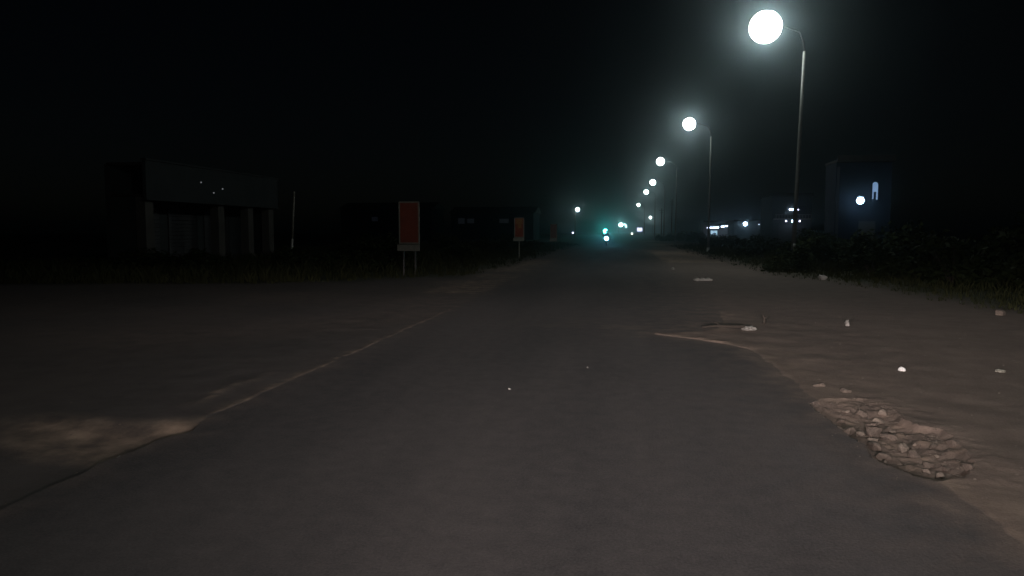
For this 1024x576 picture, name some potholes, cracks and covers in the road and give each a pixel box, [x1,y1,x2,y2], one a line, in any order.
pothole [808,398,975,481]
